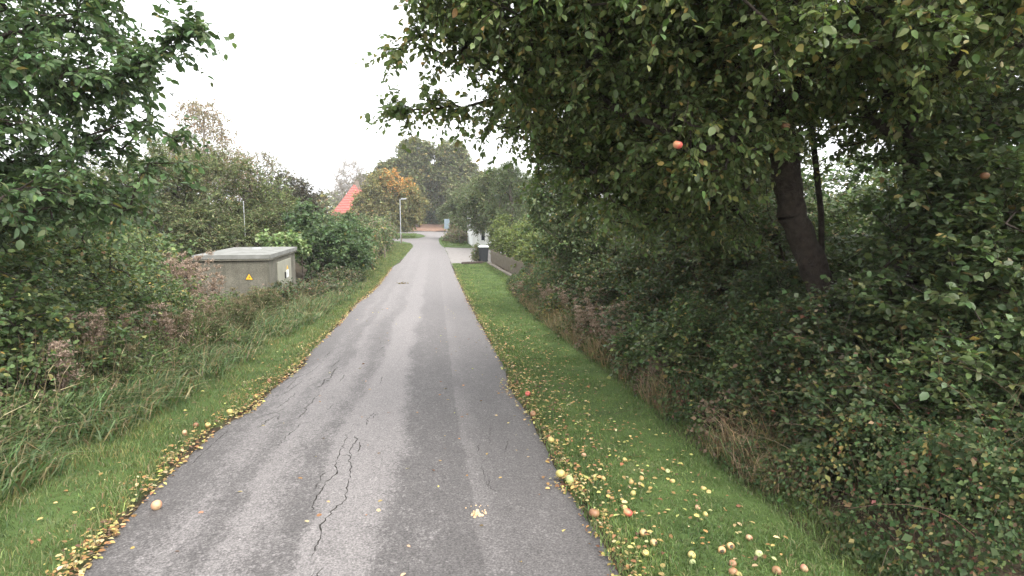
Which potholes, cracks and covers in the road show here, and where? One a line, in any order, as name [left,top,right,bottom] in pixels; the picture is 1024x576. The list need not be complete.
crack [312,414,376,555]
crack [257,352,344,428]
